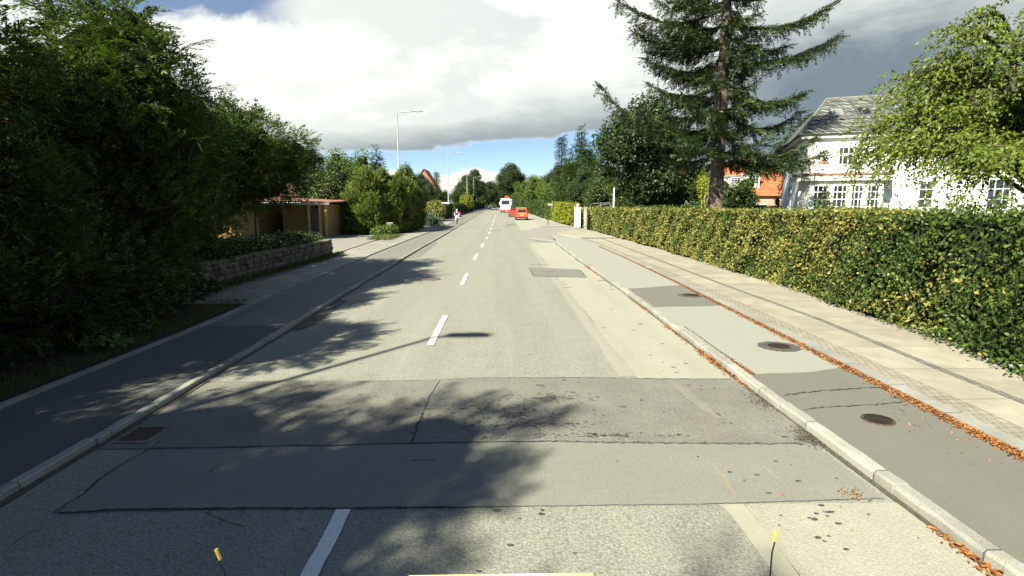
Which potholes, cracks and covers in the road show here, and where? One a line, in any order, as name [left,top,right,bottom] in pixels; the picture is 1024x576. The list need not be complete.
manhole cover [757,341,802,352]
manhole cover [860,413,896,426]
drain grate [109,425,173,444]
crack [53,383,866,526]
